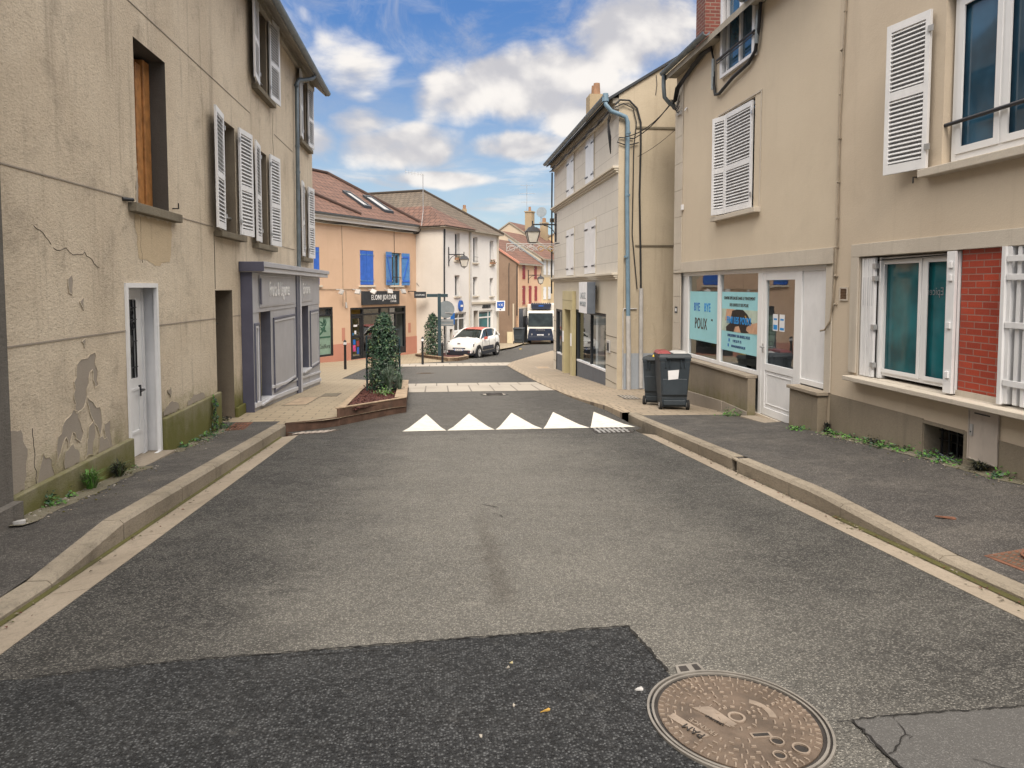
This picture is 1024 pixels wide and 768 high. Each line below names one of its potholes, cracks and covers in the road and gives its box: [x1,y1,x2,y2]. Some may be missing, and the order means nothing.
crack [889,716,913,753]
manhole cover [984,549,1024,571]
manhole cover [647,662,836,768]
